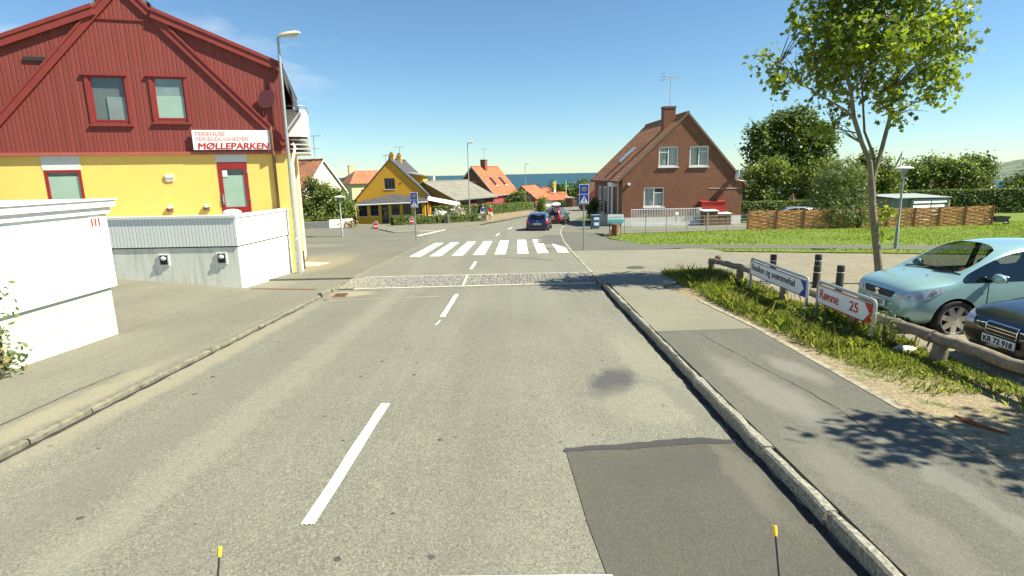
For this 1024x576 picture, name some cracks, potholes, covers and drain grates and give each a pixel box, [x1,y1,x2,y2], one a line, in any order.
crack [704,335,881,437]
